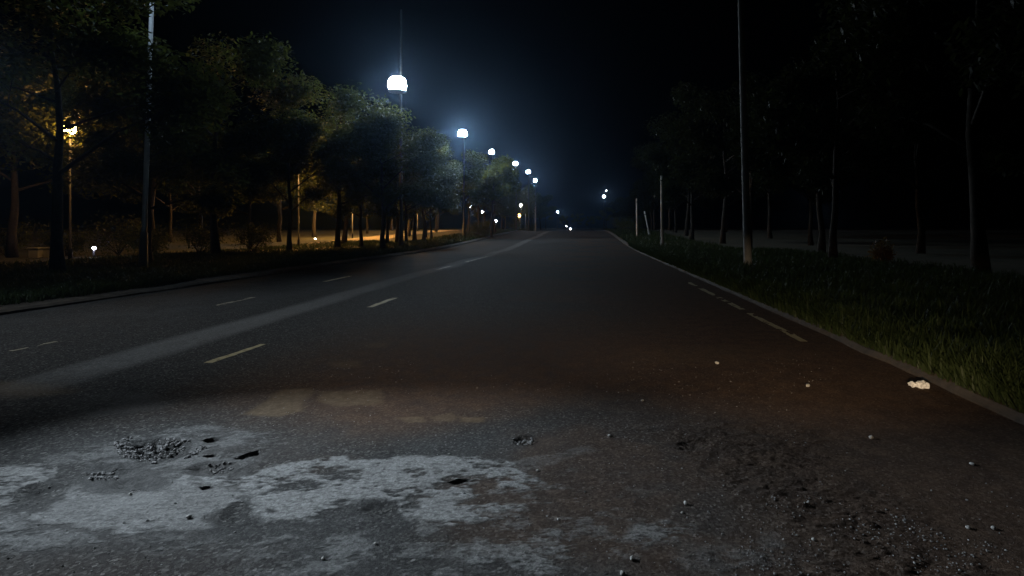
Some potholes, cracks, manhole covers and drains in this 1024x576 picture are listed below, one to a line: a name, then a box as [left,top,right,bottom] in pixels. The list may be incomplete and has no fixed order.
pothole [511,435,537,446]
pothole [120,438,192,463]
pothole [672,435,716,454]
